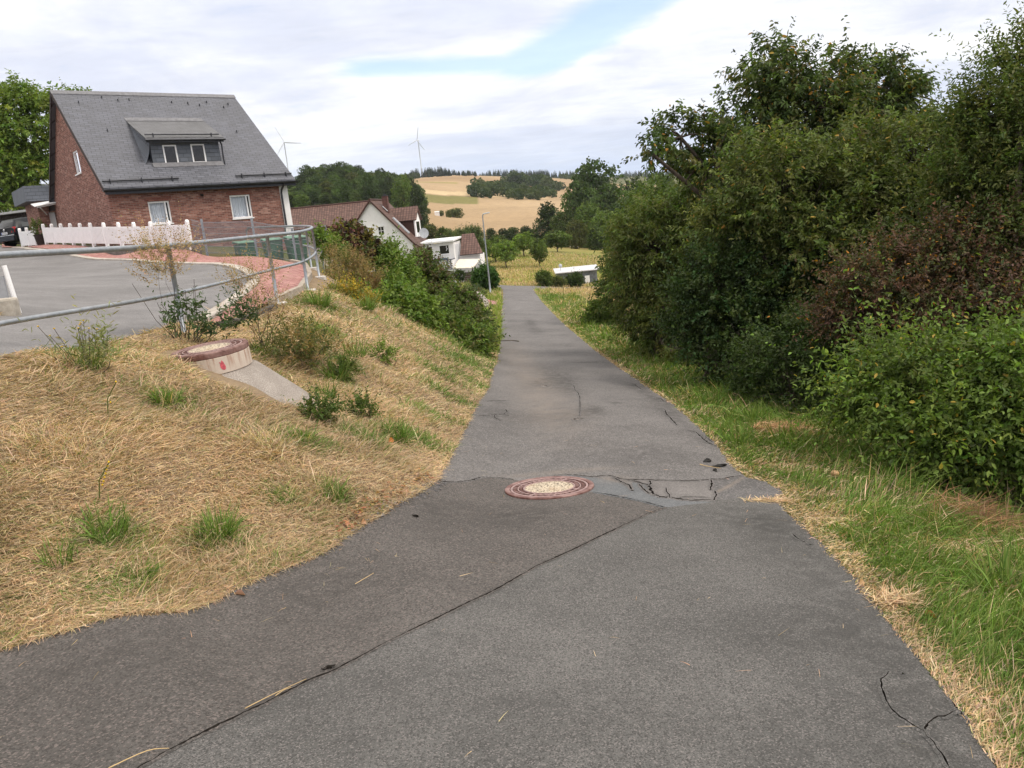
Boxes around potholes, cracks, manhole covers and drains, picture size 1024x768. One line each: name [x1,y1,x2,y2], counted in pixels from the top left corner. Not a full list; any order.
crack [876,670,973,768]
crack [480,400,509,420]
crack [554,474,744,508]
crack [572,383,582,416]
manhole cover [505,476,594,500]
crack [632,383,716,446]
